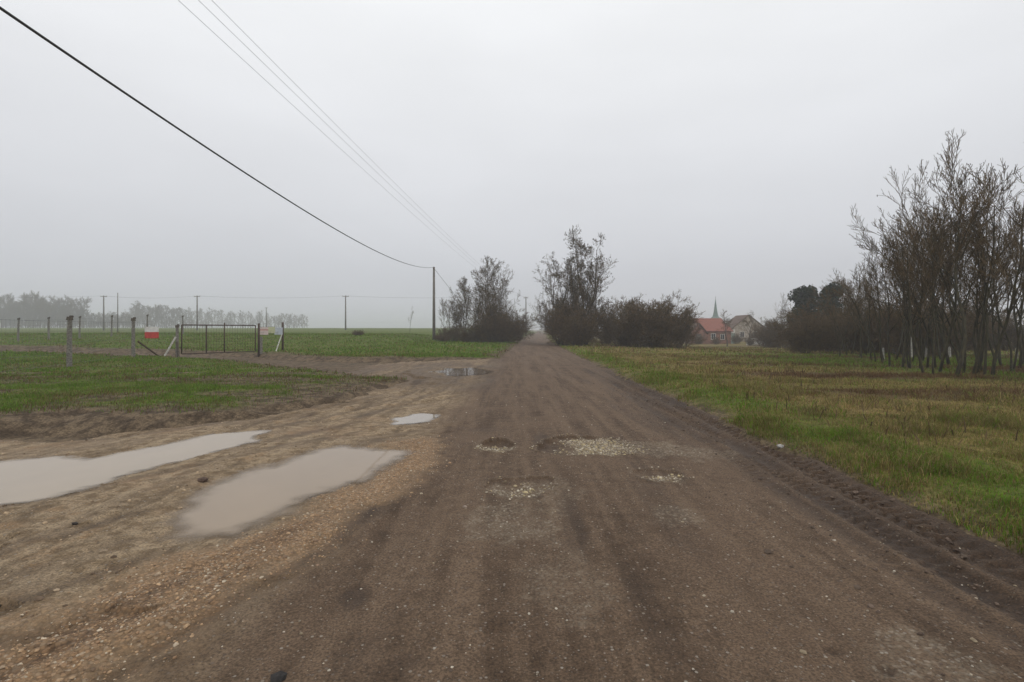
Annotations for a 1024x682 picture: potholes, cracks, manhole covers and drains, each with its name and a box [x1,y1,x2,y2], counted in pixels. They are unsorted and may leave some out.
pothole [471,436,522,454]
pothole [529,433,650,458]
pothole [626,466,694,485]
pothole [476,475,563,500]
